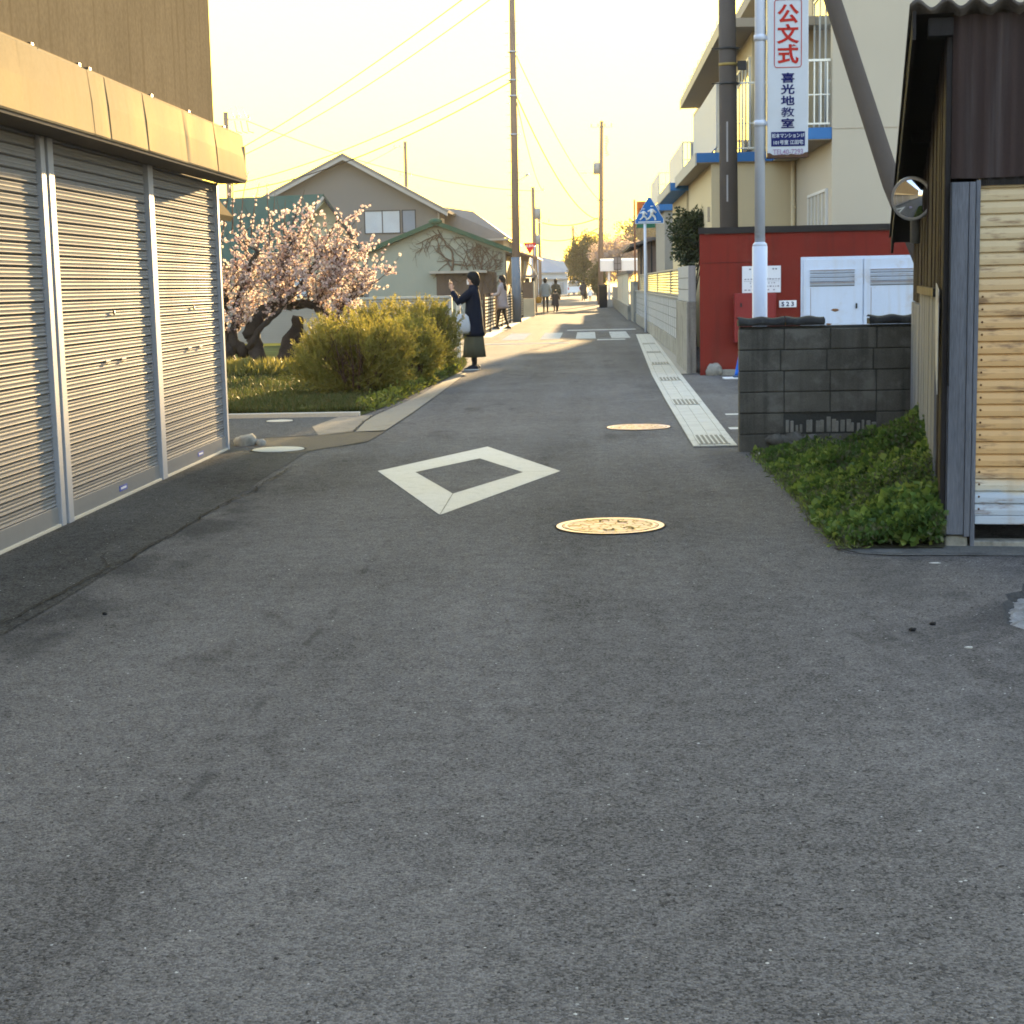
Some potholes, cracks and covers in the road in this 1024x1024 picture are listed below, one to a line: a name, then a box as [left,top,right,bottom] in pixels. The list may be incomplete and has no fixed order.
manhole cover [555,518,666,534]
